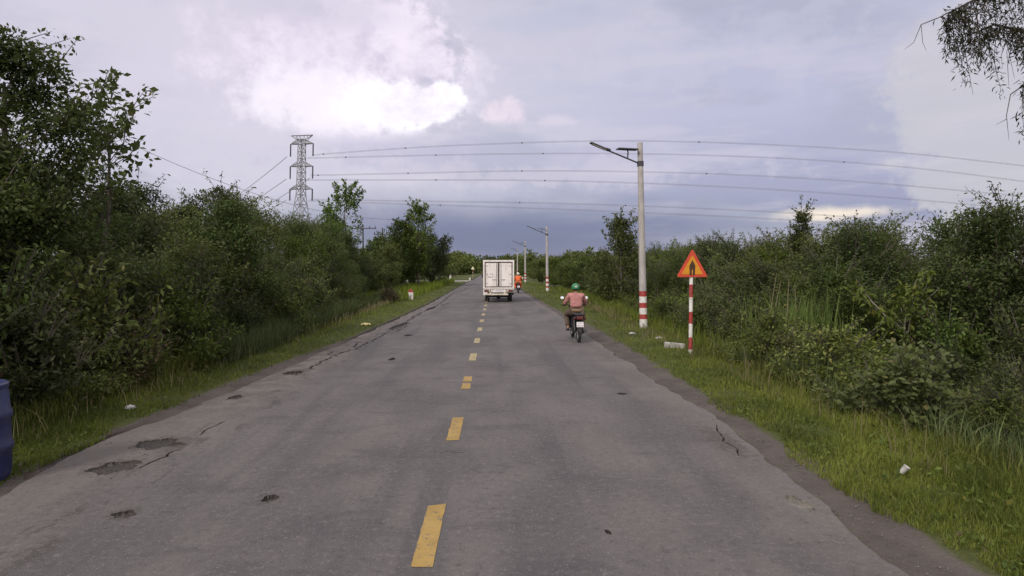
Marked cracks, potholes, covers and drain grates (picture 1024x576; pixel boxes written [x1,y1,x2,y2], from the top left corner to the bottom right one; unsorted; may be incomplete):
crack [309,288,467,369]
pothole [111,510,136,518]
crack [716,425,739,456]
crack [140,421,225,468]
pothole [84,460,143,475]
pothole [135,438,185,450]
